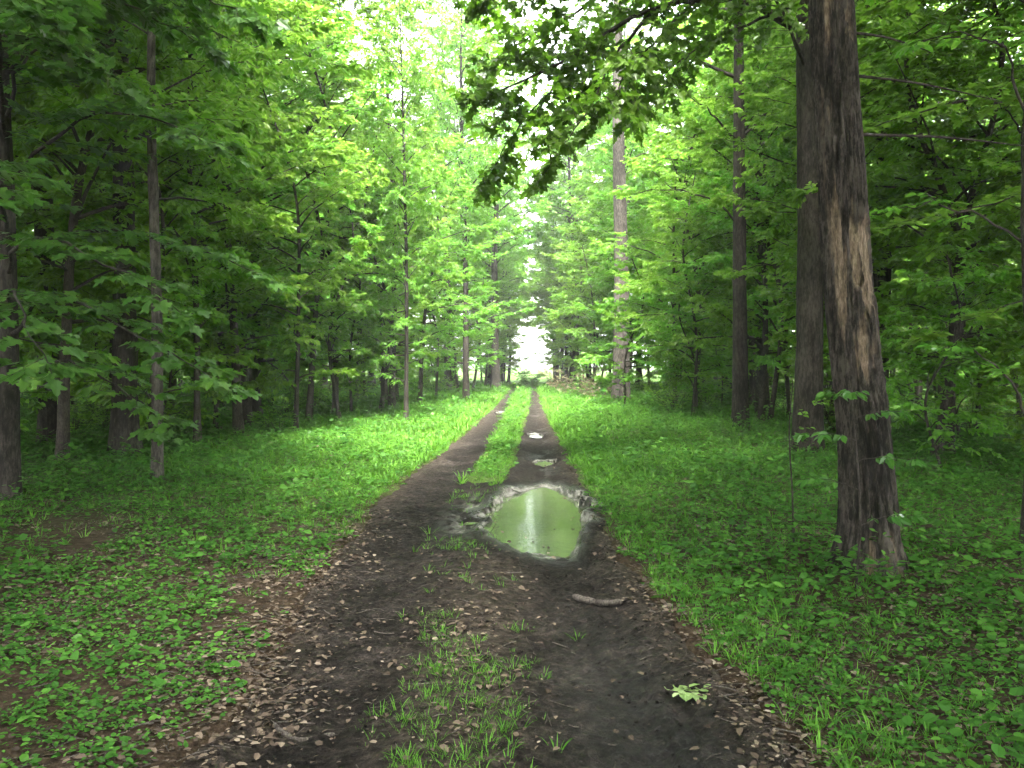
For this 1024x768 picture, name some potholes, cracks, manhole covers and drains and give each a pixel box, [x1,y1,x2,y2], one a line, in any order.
pothole [460,479,613,574]
pothole [529,457,561,468]
